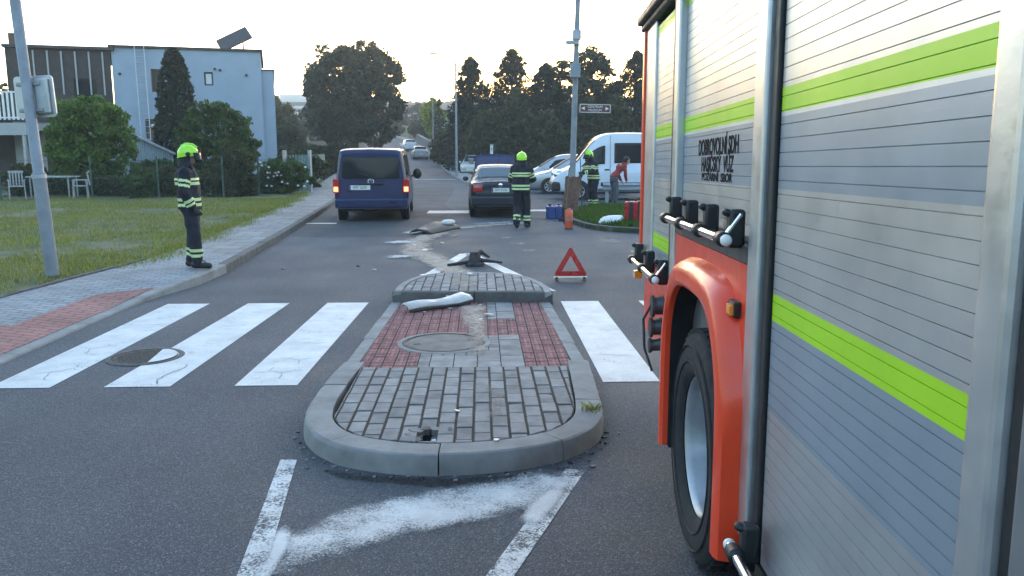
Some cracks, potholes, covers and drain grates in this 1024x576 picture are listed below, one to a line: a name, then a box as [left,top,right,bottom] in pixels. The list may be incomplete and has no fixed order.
pothole [405,426,452,443]
manhole cover [397,332,490,355]
manhole cover [105,348,185,367]
